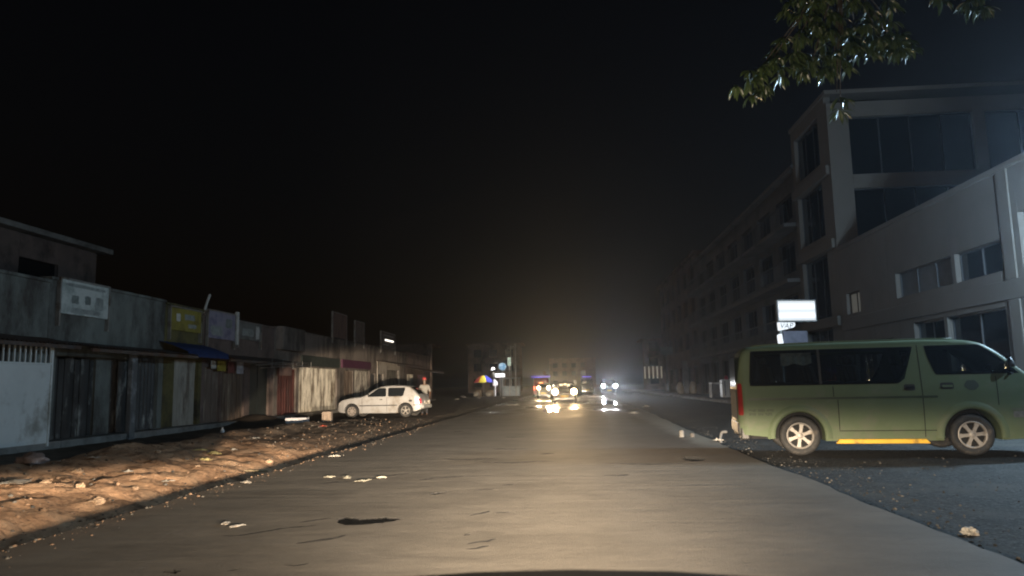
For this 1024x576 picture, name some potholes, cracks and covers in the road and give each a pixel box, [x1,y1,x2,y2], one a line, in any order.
crack [465,534,497,549]
pothole [337,517,403,525]
